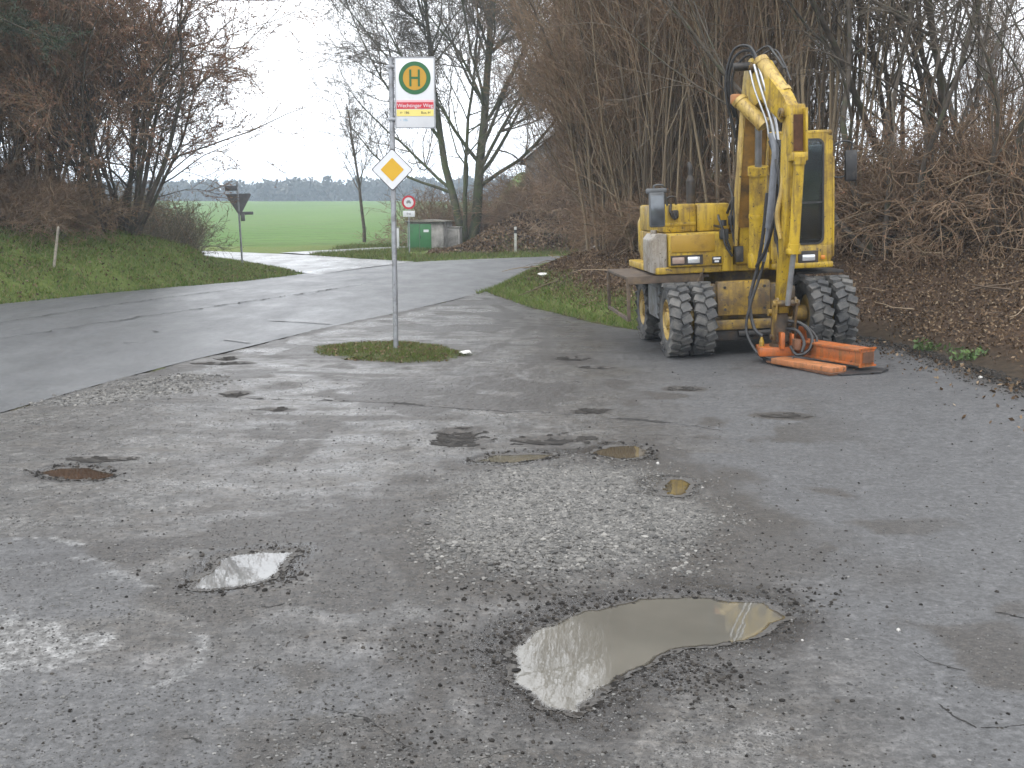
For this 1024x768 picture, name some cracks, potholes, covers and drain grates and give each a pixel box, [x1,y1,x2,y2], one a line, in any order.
pothole [505,432,599,445]
pothole [417,427,498,451]
pothole [590,444,653,460]
crack [938,703,1024,728]
pothole [473,452,558,464]
pothole [503,593,796,718]
pothole [184,547,304,591]
pothole [652,477,700,497]
